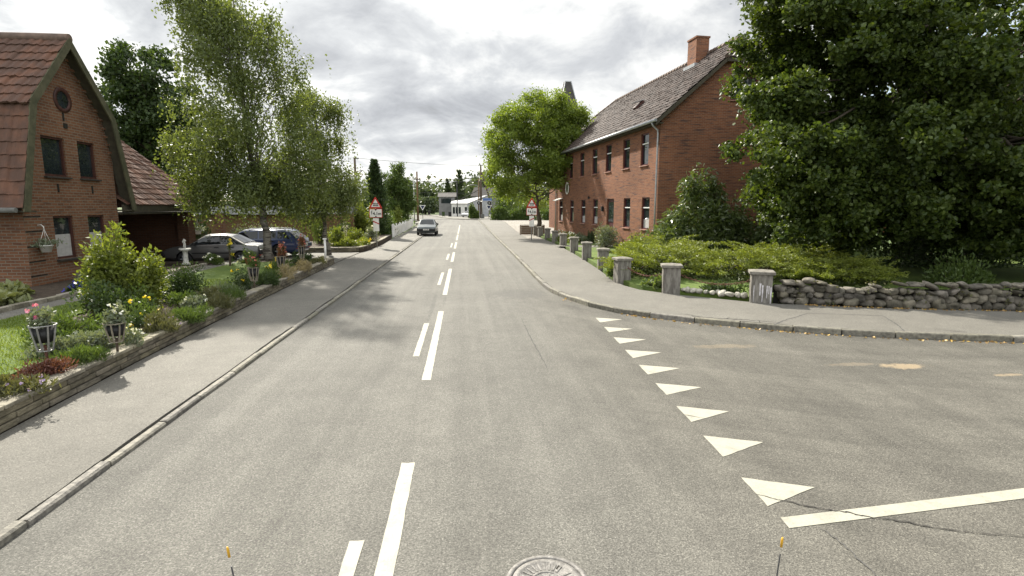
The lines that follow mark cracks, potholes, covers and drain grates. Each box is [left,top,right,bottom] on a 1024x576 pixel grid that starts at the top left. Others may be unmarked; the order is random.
crack [822,529,877,576]
manhole cover [507,555,587,576]
